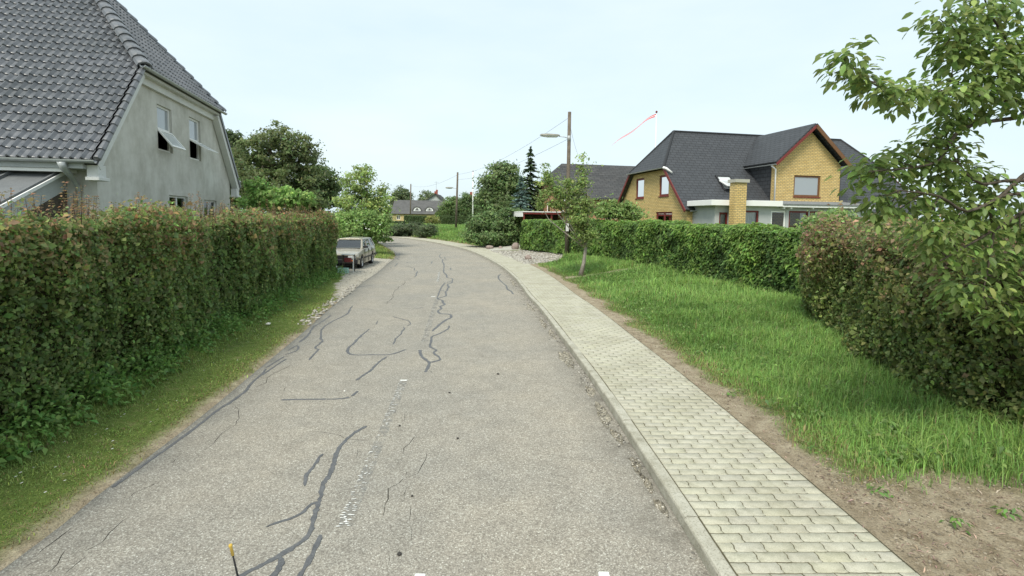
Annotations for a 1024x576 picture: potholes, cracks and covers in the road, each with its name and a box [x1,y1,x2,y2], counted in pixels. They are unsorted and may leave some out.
crack [17,521,122,572]
crack [383,413,427,537]
